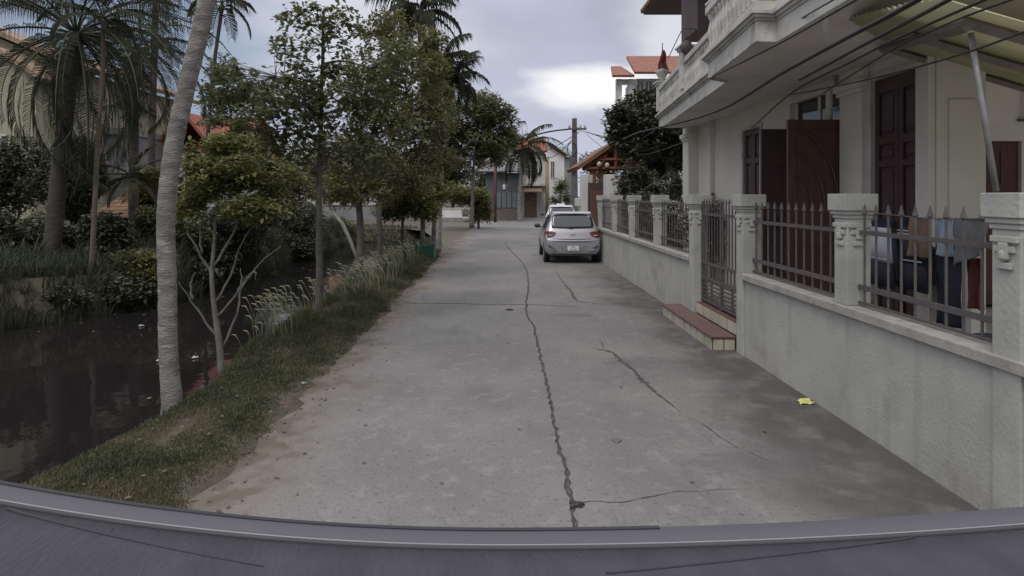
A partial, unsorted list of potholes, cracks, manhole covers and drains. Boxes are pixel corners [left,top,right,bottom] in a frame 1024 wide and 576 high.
crack [413,240,779,527]
